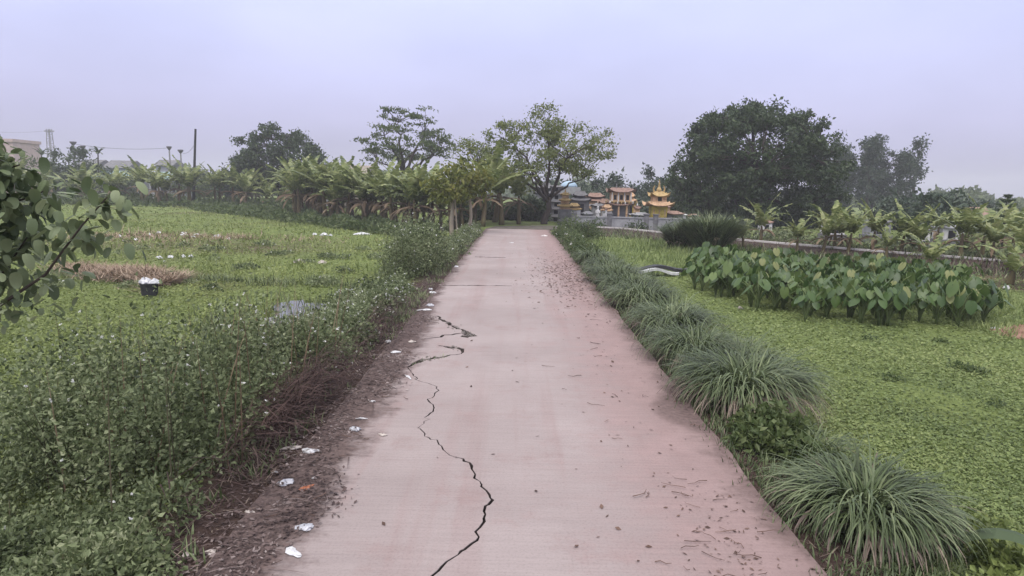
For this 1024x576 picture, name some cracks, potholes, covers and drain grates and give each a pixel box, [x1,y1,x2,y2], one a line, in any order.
crack [408,316,494,576]
